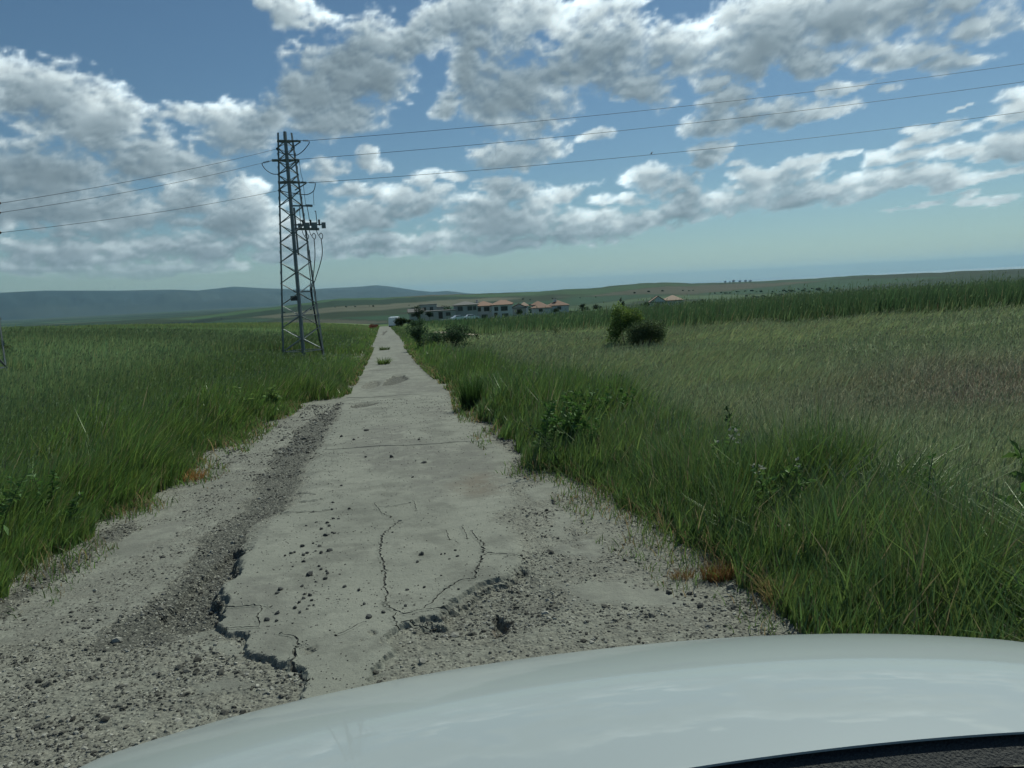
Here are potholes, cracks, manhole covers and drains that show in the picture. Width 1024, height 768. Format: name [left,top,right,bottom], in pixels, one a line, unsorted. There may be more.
crack [223,603,311,686]
crack [335,501,524,636]
